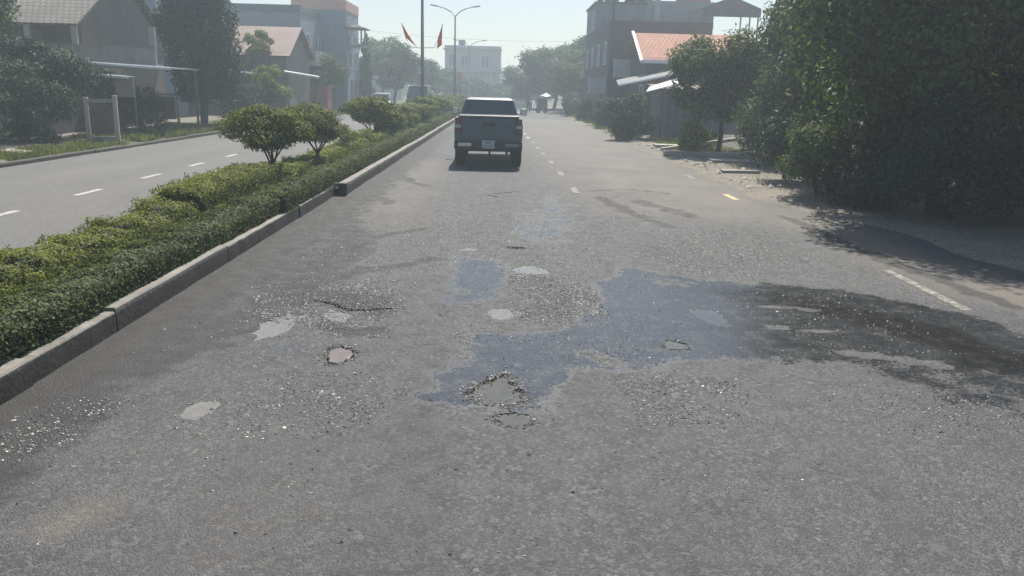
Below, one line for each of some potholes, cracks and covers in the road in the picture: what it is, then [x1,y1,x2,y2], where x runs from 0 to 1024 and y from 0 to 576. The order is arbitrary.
pothole [487,308,525,320]
crack [313,300,403,311]
pothole [316,341,362,368]
pothole [451,366,541,414]
pothole [509,265,550,274]
pothole [249,313,310,341]
pothole [483,411,542,428]
pothole [174,398,227,425]
pothole [655,339,693,352]
